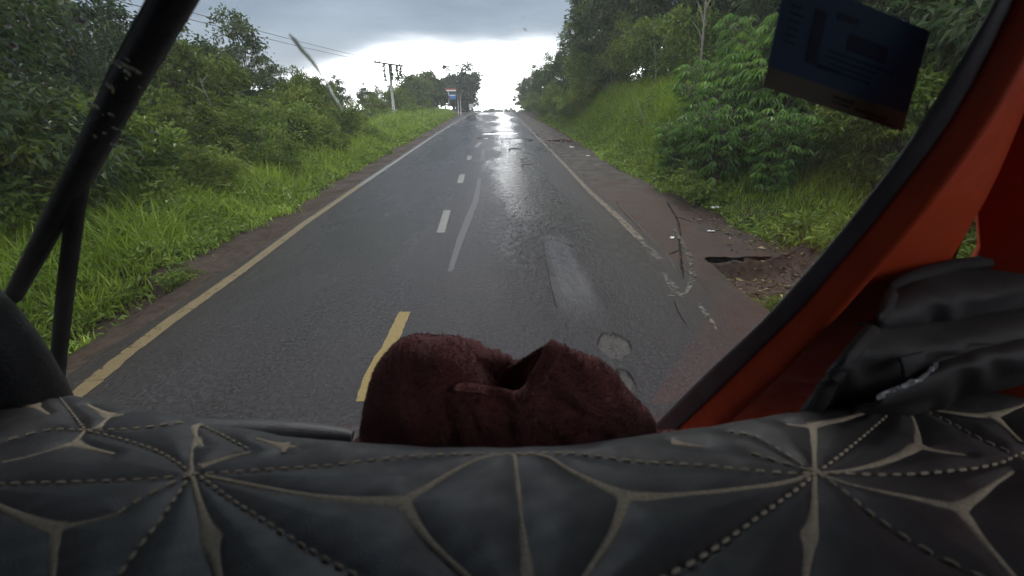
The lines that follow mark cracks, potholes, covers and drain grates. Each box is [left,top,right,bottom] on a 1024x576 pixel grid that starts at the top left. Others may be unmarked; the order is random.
pothole [597,332,632,359]
crack [616,202,692,279]
crack [542,241,573,310]
pothole [617,369,636,391]
